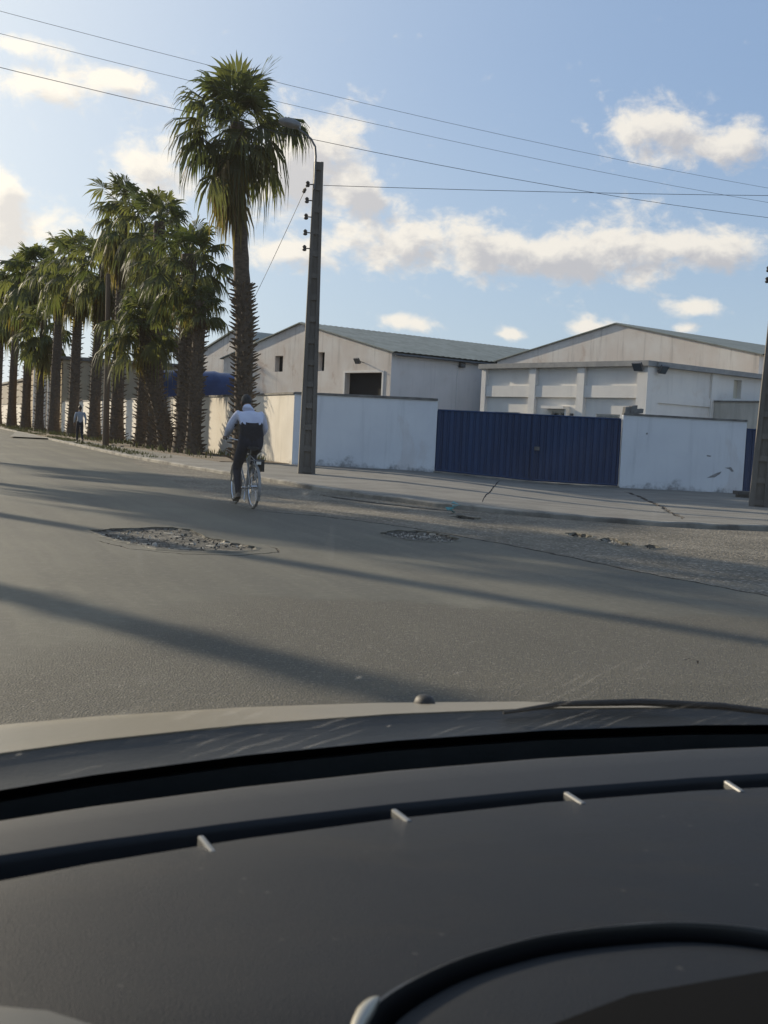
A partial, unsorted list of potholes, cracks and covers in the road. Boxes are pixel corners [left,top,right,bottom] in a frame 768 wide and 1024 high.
crack [323,481,499,514]
crack [624,491,684,519]
pothole [377,530,466,543]
pothole [83,527,261,553]
pothole [596,538,635,547]
